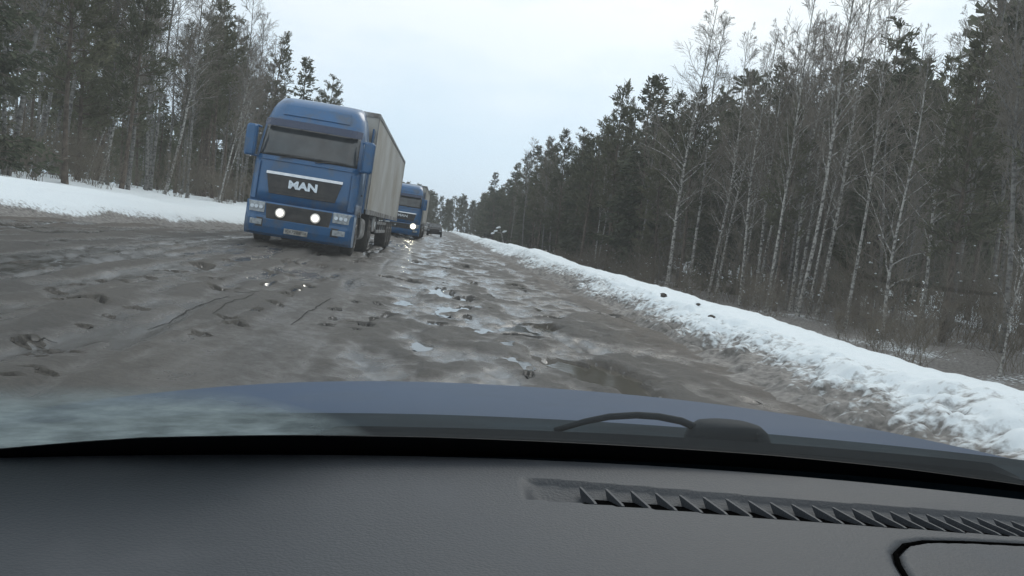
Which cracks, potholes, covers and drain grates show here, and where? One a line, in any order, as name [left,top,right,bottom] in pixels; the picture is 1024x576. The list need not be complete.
pothole [81,294,110,305]
pothole [34,366,60,377]
pothole [10,335,32,350]
crack [148,291,255,330]
pothole [20,334,47,349]
